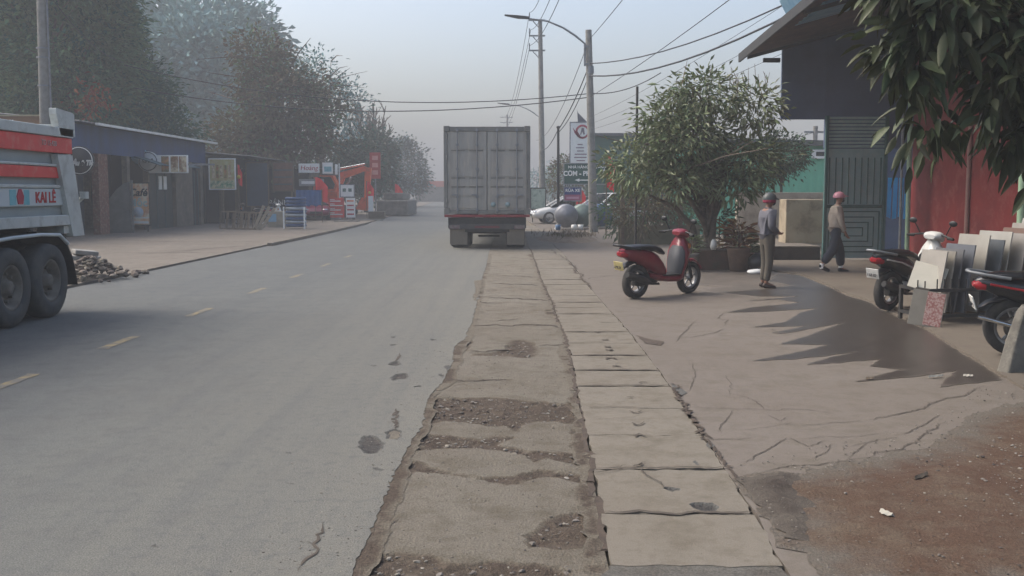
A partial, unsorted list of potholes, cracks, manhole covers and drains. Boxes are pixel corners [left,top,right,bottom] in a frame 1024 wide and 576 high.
pothole [357,435,385,454]
crack [297,524,324,571]
pothole [408,459,581,486]
crack [690,364,983,471]
pothole [431,397,577,434]
pothole [418,434,580,467]
pothole [521,511,588,551]
